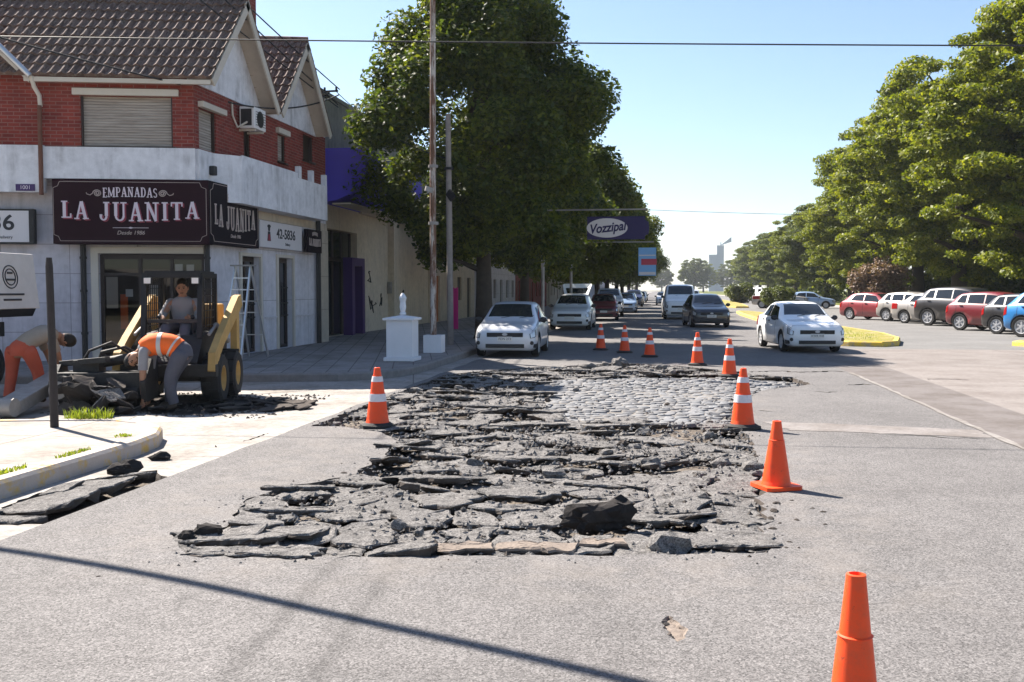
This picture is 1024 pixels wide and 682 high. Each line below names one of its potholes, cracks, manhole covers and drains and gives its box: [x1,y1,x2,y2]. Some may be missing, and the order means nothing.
pothole [1,470,167,522]
pothole [222,364,810,556]
